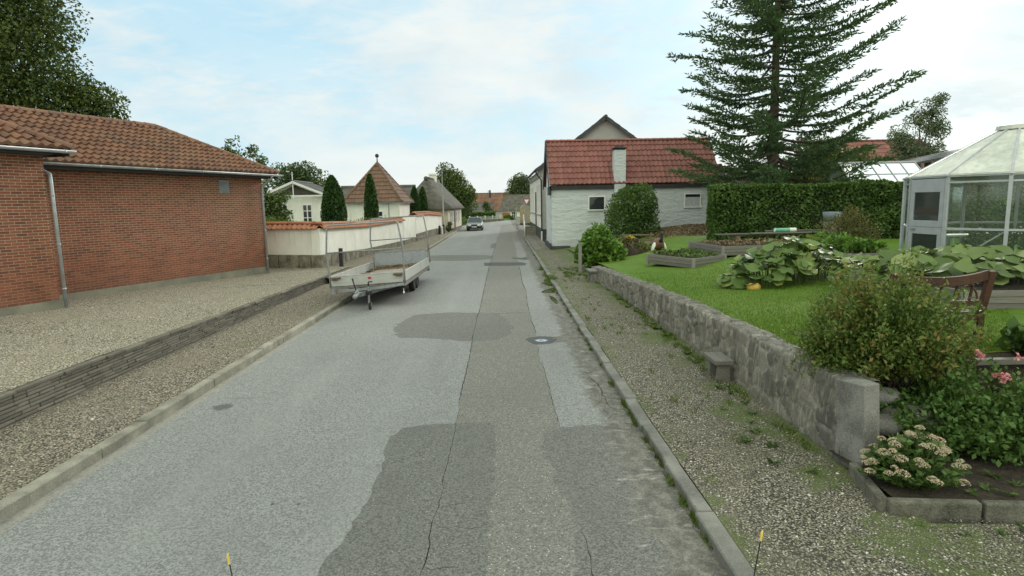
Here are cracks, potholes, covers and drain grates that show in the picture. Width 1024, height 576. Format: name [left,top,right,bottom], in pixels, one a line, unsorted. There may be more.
crack [420,238,498,574]
